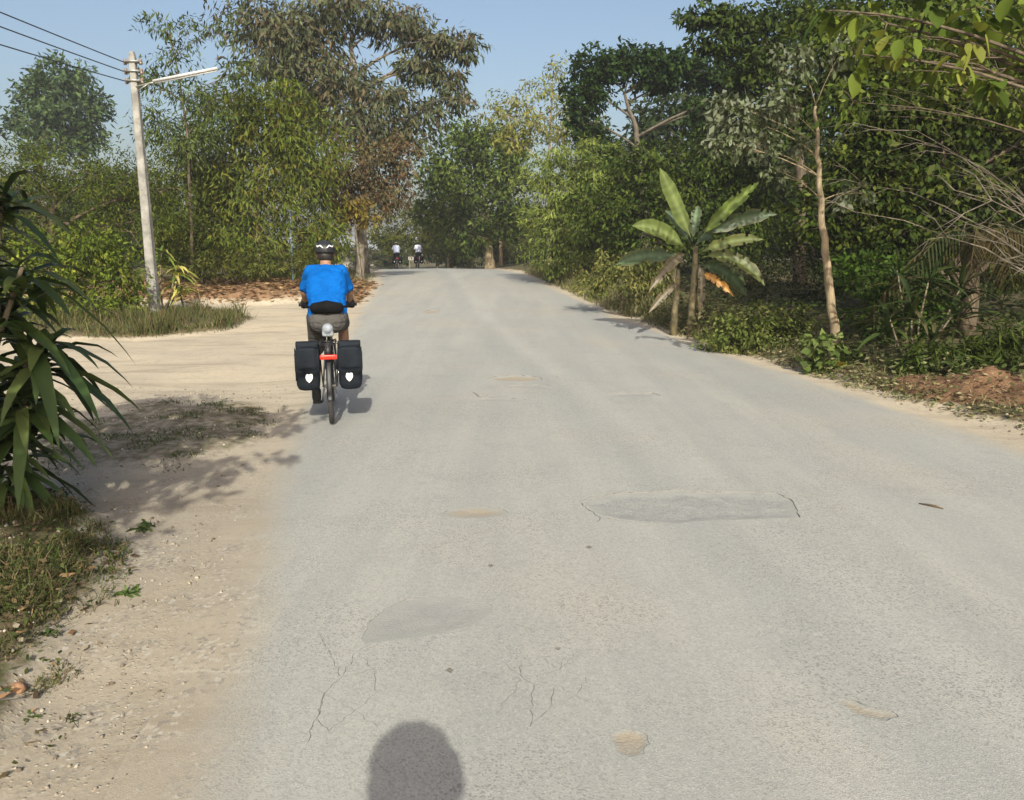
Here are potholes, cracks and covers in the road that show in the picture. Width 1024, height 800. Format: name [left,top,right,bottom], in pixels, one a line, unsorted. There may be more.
crack [492,649,595,726]
crack [307,634,377,743]
pothole [438,507,509,518]
pothole [832,698,899,721]
pothole [610,729,650,757]
